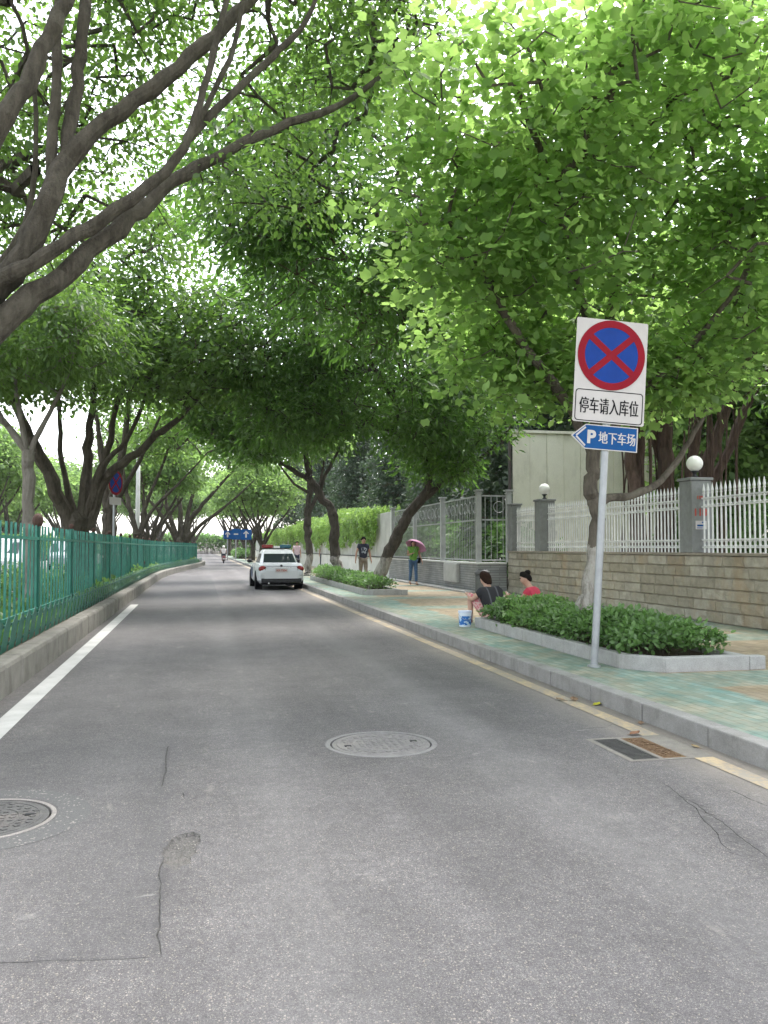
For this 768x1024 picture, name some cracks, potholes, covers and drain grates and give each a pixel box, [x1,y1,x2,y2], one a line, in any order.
drain grate [621,737,686,758]
crack [161,746,184,797]
pothole [161,831,201,870]
manhole cover [0,798,57,838]
crack [1,861,163,963]
crack [662,782,767,857]
manhole cover [325,731,437,758]
drain grate [594,739,658,760]
